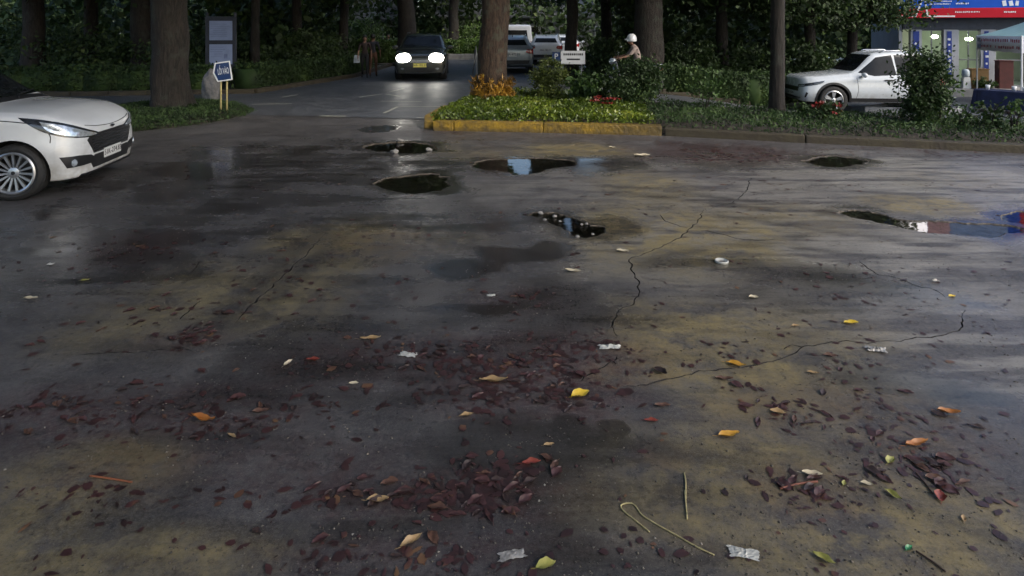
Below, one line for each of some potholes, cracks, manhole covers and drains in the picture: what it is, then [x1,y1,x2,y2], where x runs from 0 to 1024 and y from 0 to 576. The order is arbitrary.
crack [624,311,965,387]
pothole [372,173,452,190]
crack [860,262,944,296]
crack [611,178,766,333]
pothole [469,157,577,175]
pothole [831,209,1024,237]
